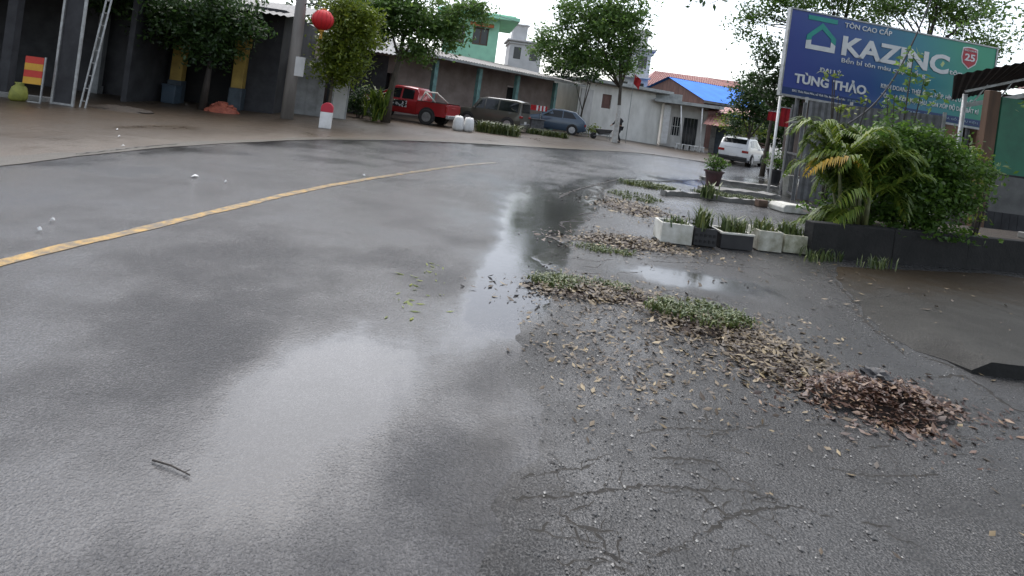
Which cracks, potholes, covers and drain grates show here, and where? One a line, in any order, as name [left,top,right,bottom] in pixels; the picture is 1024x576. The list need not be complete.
crack [513,411,925,576]
